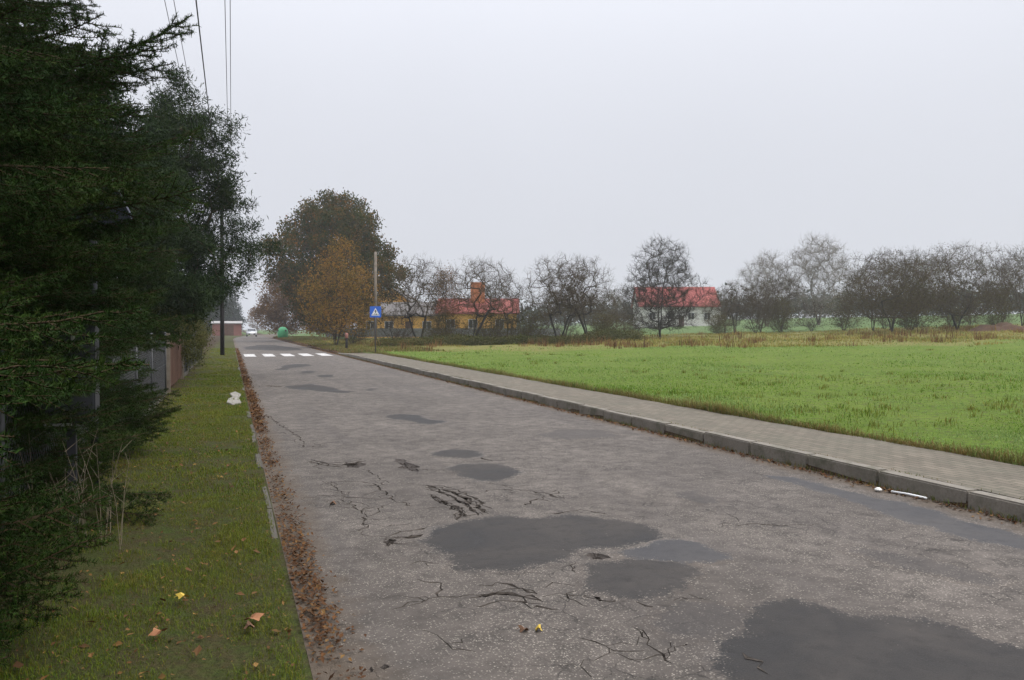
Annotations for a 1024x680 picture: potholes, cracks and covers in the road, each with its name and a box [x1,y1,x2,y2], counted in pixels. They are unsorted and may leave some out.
crack [267,416,615,610]
crack [580,626,687,677]
